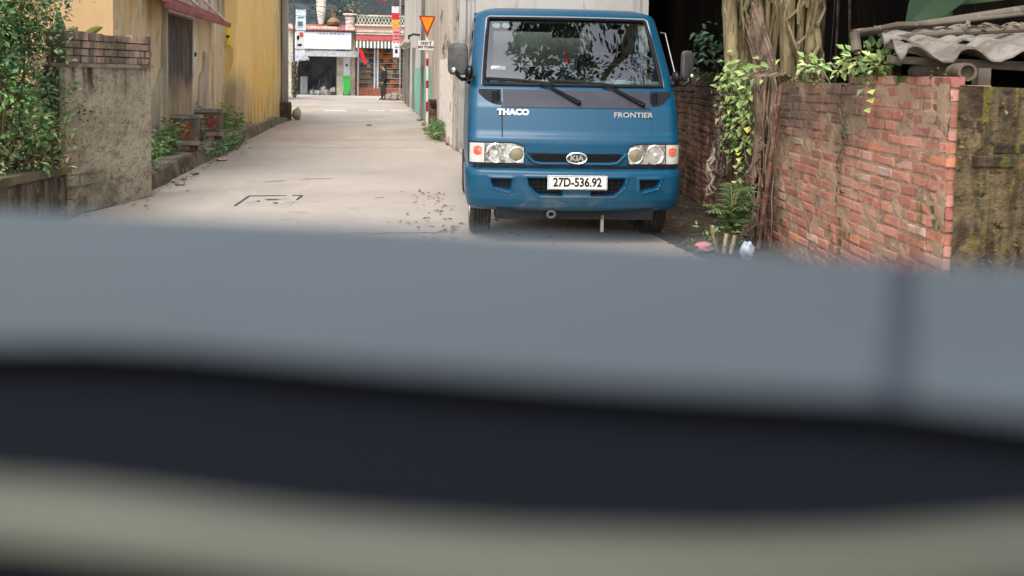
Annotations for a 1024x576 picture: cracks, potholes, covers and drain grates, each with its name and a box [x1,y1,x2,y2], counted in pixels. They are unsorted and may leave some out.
manhole cover [234,195,303,206]
